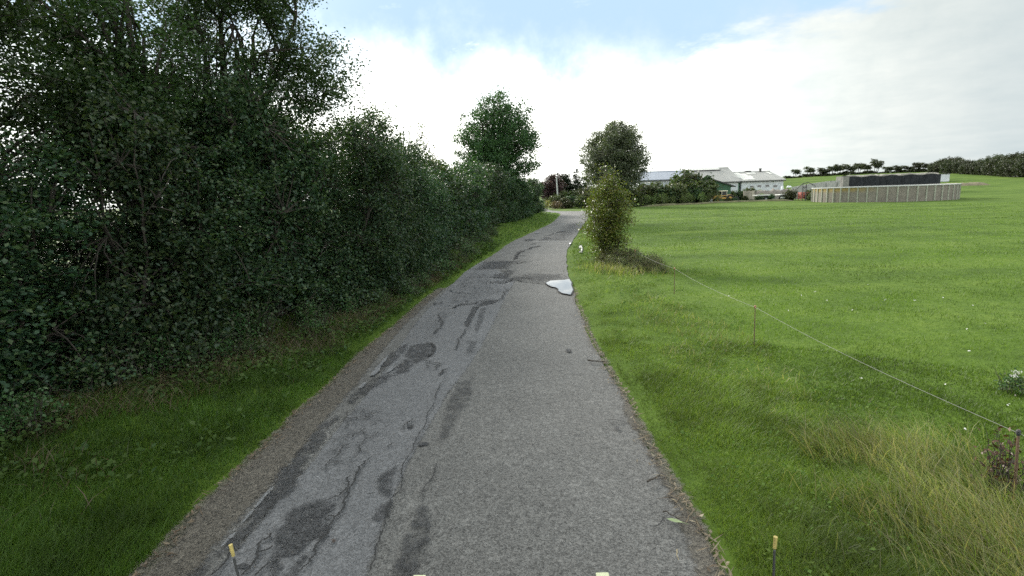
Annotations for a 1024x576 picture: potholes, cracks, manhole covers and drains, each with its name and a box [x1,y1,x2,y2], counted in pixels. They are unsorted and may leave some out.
crack [210,532,273,576]
crack [296,409,413,575]
crack [425,233,553,374]
